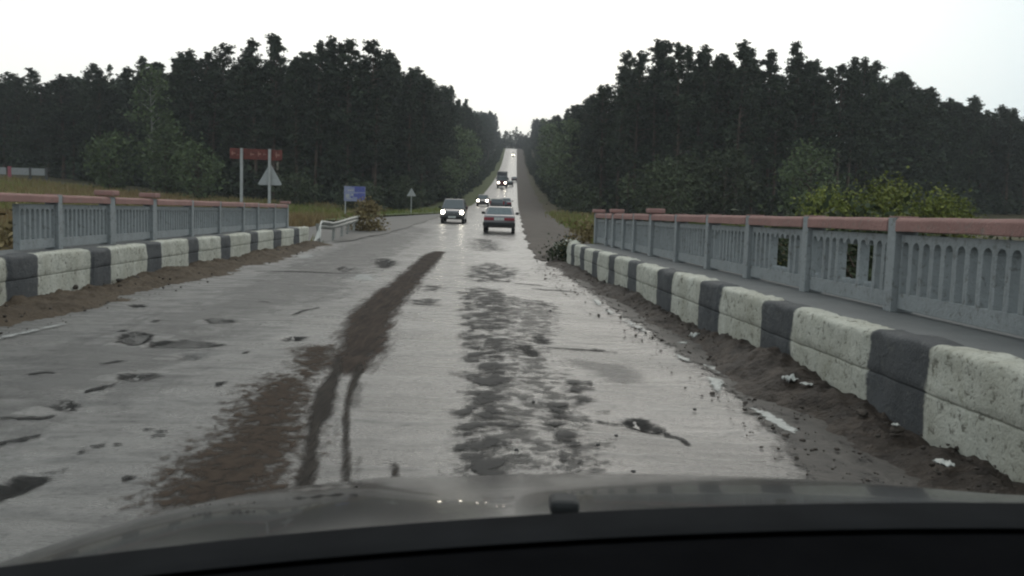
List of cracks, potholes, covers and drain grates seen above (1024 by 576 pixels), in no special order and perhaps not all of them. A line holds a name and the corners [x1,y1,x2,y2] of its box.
pothole [46,400,81,411]
pothole [146,339,226,348]
pothole [118,371,161,383]
pothole [623,418,666,435]
pothole [0,471,59,501]
pothole [114,331,152,346]
